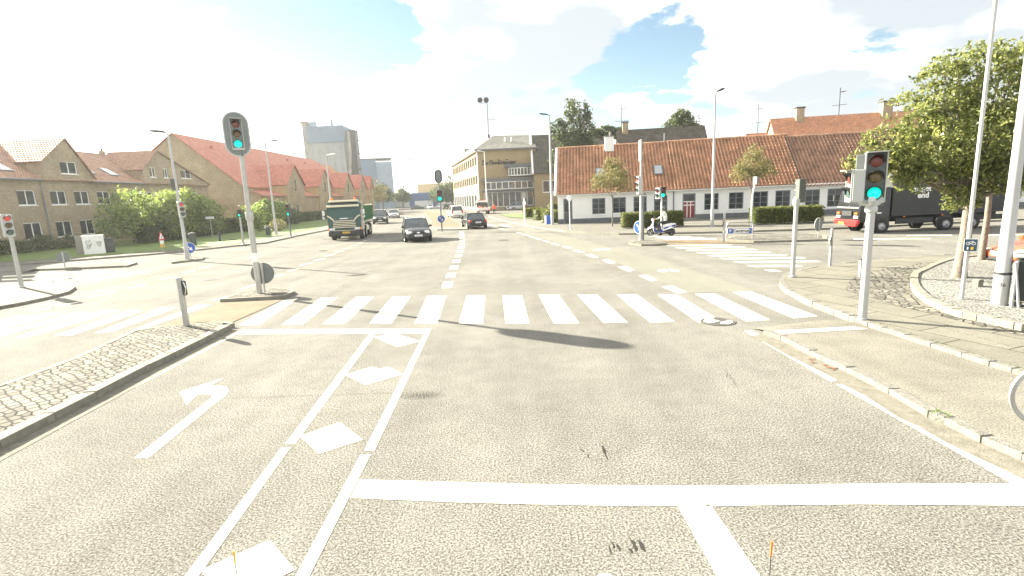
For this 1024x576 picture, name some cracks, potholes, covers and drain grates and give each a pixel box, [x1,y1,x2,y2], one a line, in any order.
manhole cover [700,317,736,326]
